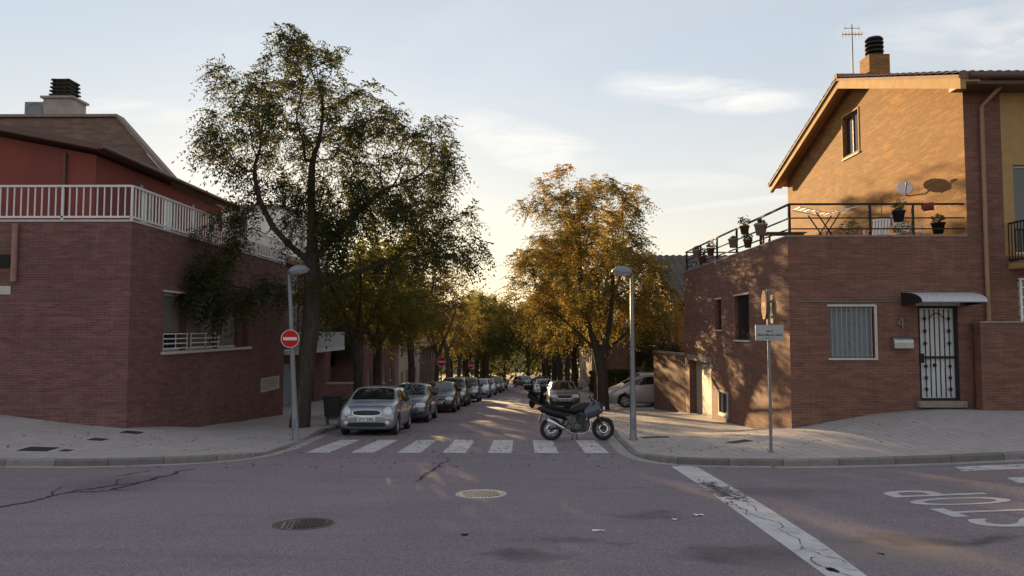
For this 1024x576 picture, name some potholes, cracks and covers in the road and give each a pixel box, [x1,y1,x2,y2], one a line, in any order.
crack [0,469,192,508]
crack [697,479,862,576]
manhole cover [272,518,334,530]
crack [416,458,449,482]
